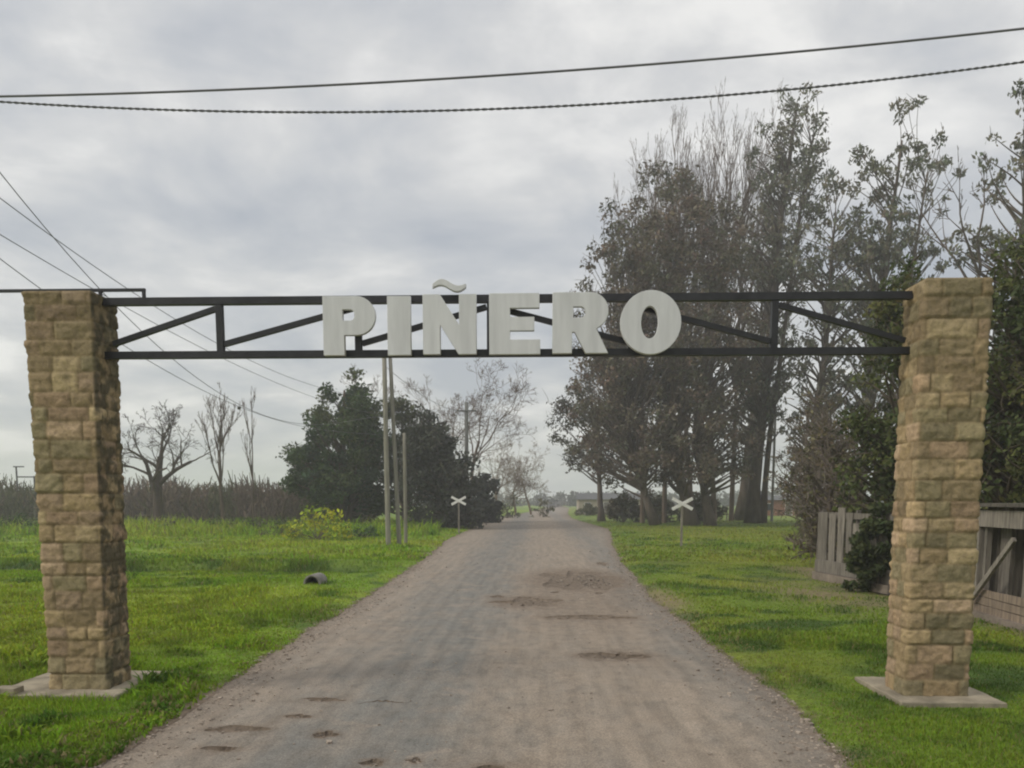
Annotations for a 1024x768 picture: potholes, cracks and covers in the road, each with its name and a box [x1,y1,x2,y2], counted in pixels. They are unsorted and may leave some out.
pothole [539,571,625,591]
pothole [312,730,340,738]
pothole [488,597,564,607]
pothole [578,652,650,660]
